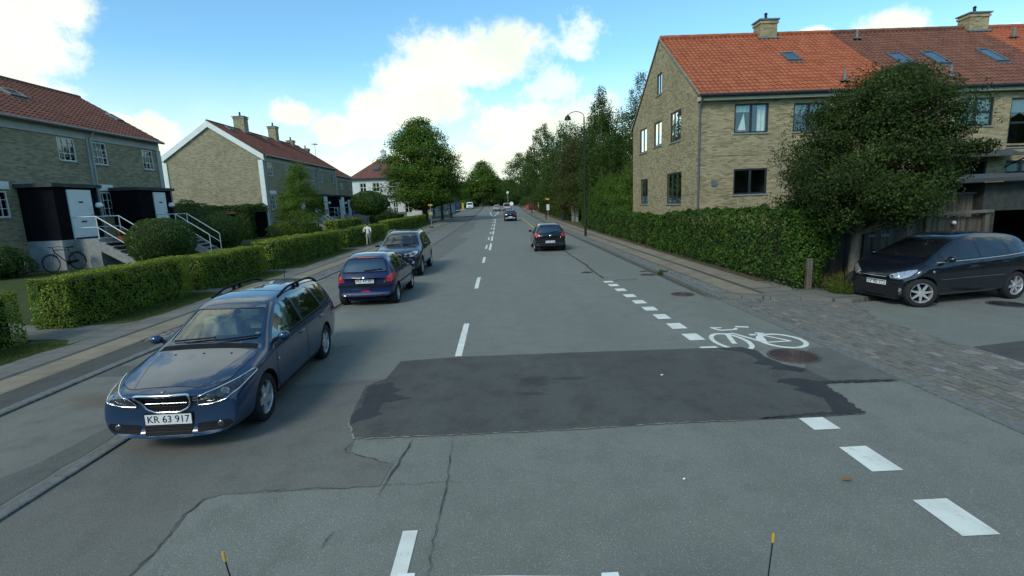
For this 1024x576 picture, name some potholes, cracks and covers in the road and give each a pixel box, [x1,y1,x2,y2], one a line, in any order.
manhole cover [767,348,821,364]
crack [241,440,477,575]
